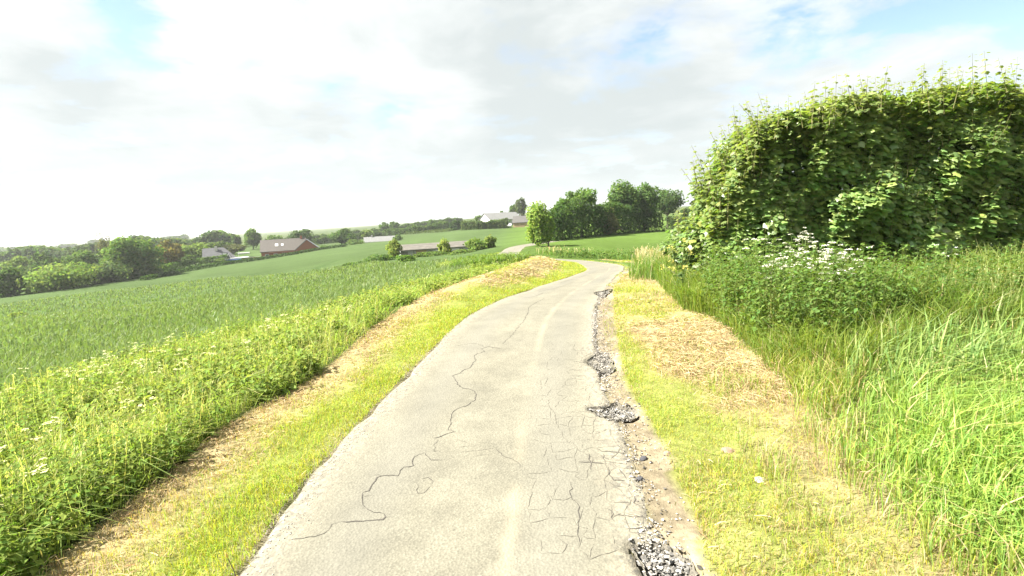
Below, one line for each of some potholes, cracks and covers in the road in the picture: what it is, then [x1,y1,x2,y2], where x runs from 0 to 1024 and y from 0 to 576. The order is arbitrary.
pothole [587,351,621,377]
crack [526,341,646,560]
pothole [628,533,726,576]
pothole [585,397,649,422]
crack [290,343,517,540]
